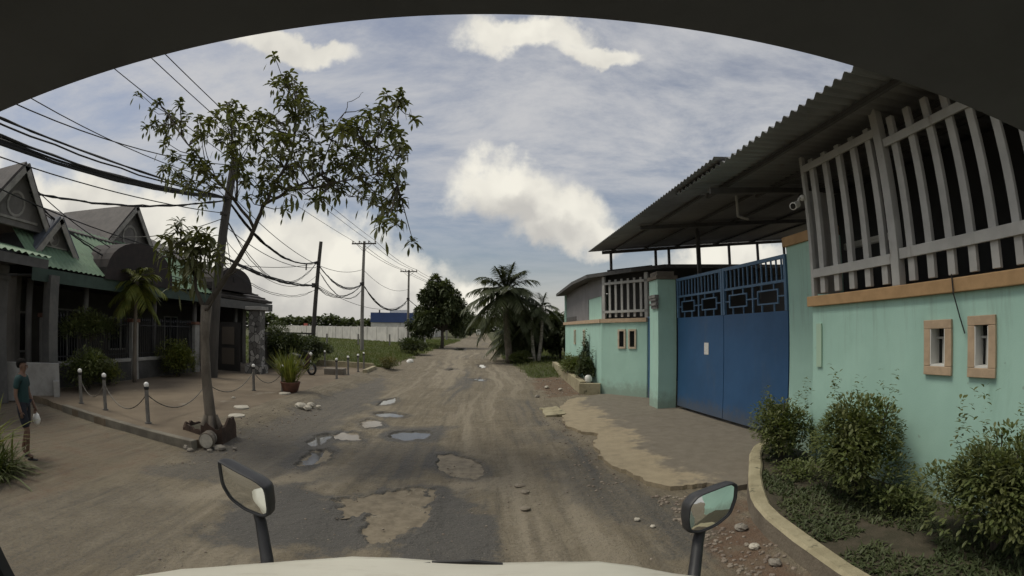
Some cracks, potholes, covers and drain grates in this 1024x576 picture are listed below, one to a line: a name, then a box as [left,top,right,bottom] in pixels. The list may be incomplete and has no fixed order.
pothole [323,485,446,553]
pothole [332,430,365,442]
pothole [374,397,399,406]
pothole [356,418,385,429]
pothole [385,429,436,442]
pothole [301,432,334,448]
pothole [431,452,491,481]
pothole [289,447,338,468]
